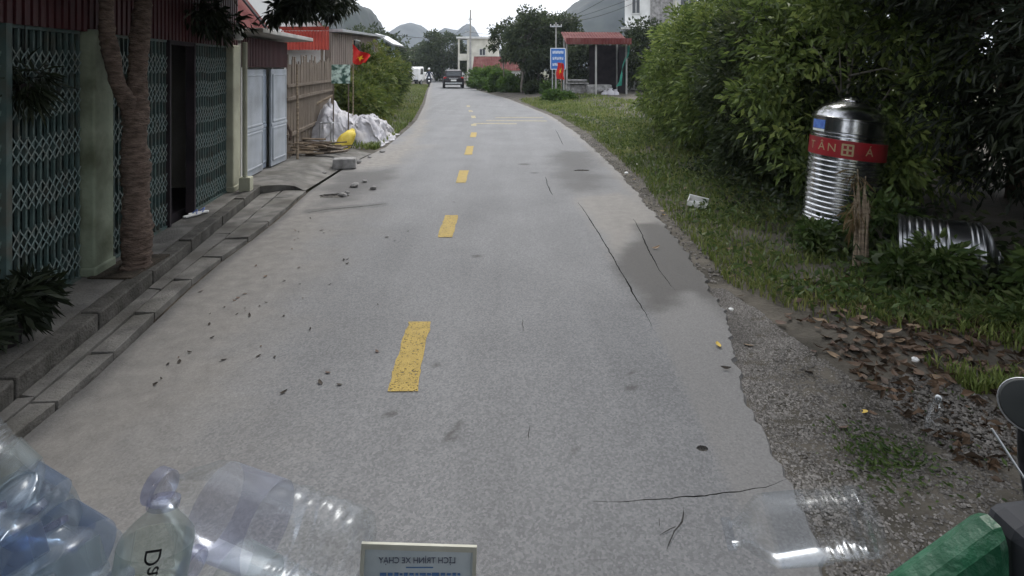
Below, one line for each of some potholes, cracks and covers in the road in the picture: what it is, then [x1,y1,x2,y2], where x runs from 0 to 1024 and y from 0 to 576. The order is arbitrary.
crack [537,176,689,331]
crack [550,129,569,146]
crack [590,464,796,549]
